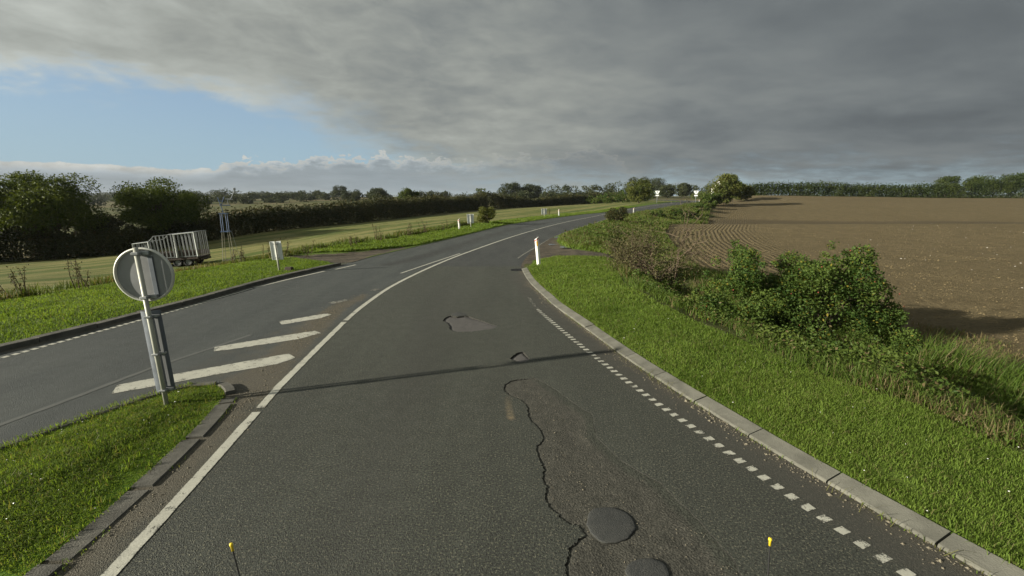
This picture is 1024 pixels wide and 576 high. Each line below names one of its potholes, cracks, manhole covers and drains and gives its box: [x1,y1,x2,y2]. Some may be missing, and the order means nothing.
pothole [510,352,529,363]
pothole [443,316,496,332]
